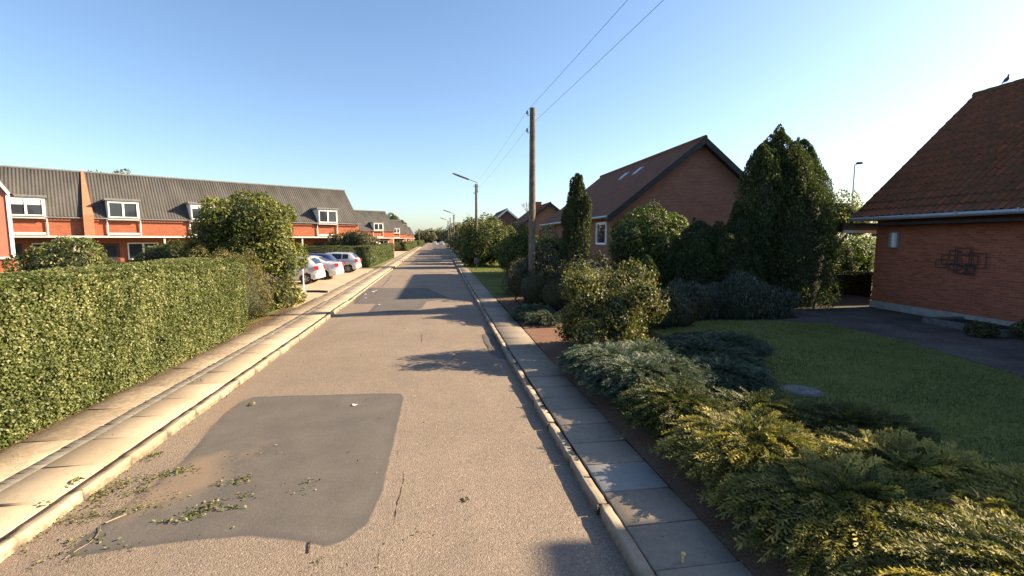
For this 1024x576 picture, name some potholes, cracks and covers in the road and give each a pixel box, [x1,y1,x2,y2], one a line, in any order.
manhole cover [779,385,824,398]
